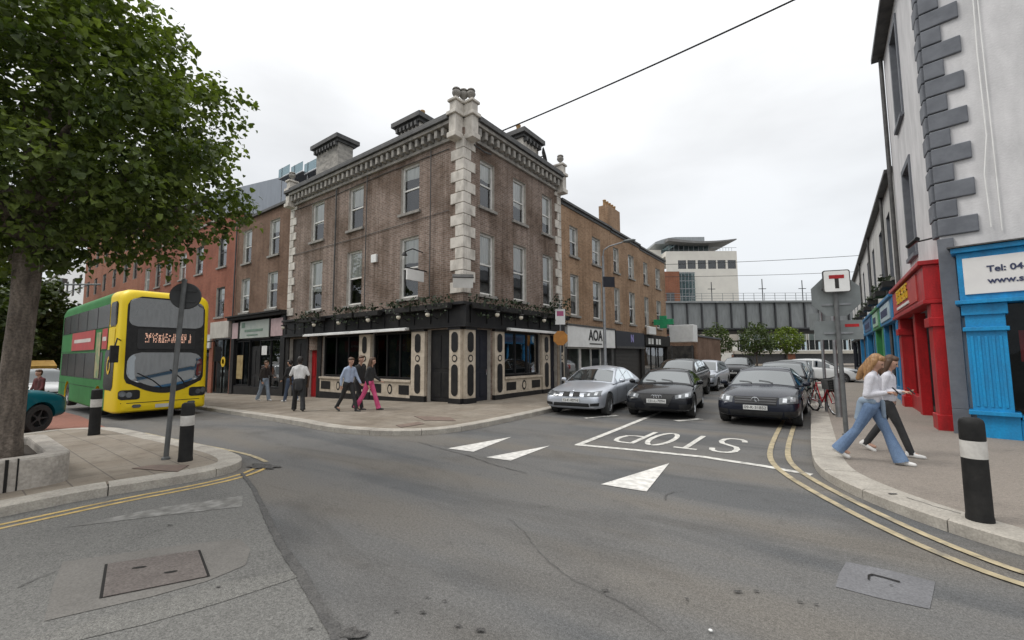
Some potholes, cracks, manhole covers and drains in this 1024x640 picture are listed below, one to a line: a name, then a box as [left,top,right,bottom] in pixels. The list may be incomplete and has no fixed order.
crack [510,519,665,631]
manhole cover [99,550,210,598]
